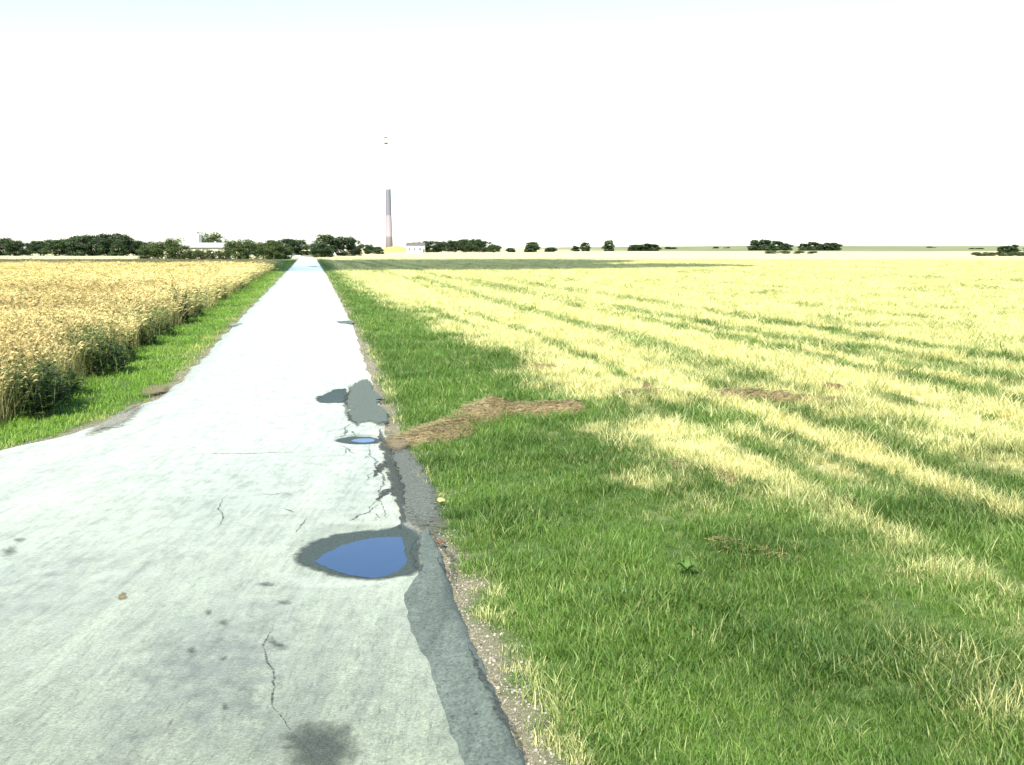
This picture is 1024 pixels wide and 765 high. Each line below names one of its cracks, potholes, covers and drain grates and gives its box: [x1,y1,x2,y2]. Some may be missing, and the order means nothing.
crack [338,425,457,588]
pothole [295,524,423,580]
pothole [335,436,380,444]
crack [262,632,290,737]
